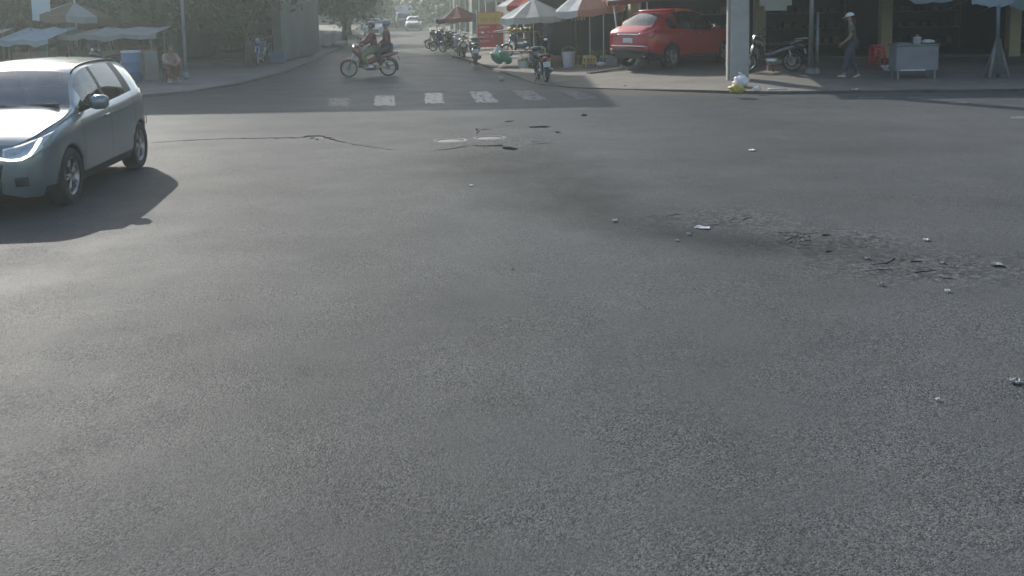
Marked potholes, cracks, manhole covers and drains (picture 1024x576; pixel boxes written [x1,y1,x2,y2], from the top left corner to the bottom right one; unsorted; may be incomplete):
crack [154,135,392,150]
crack [851,232,957,279]
